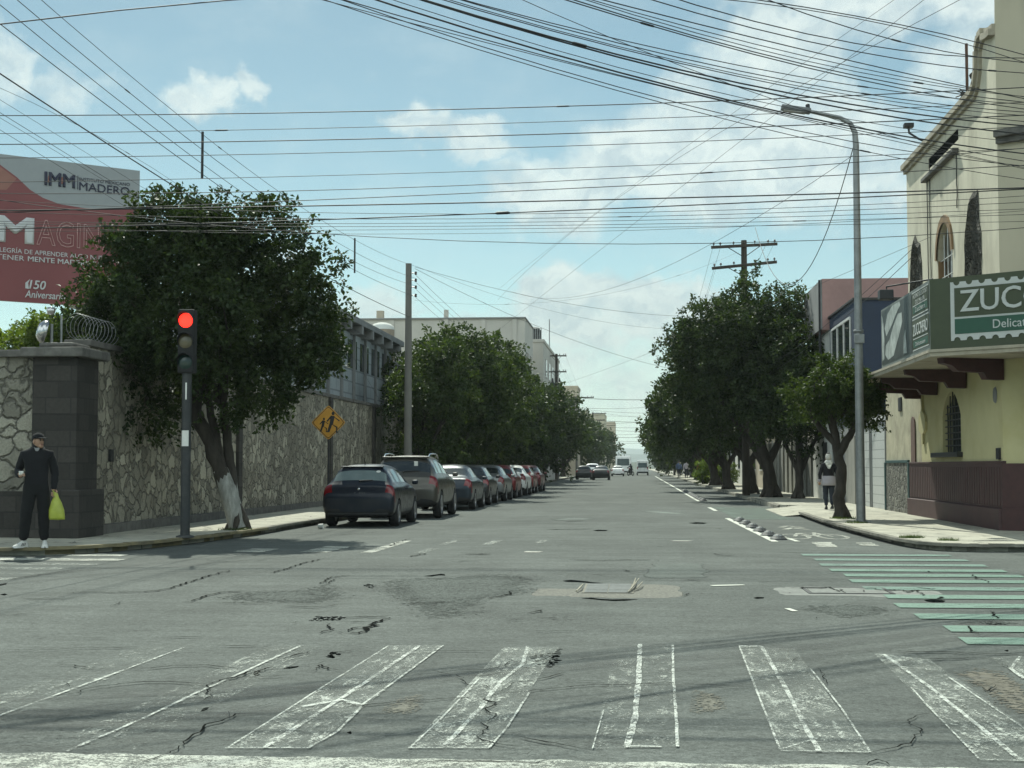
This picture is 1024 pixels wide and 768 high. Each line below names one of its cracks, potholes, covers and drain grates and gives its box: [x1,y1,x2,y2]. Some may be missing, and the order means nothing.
crack [52,601,455,764]
crack [865,712,935,765]
crack [14,559,359,615]
